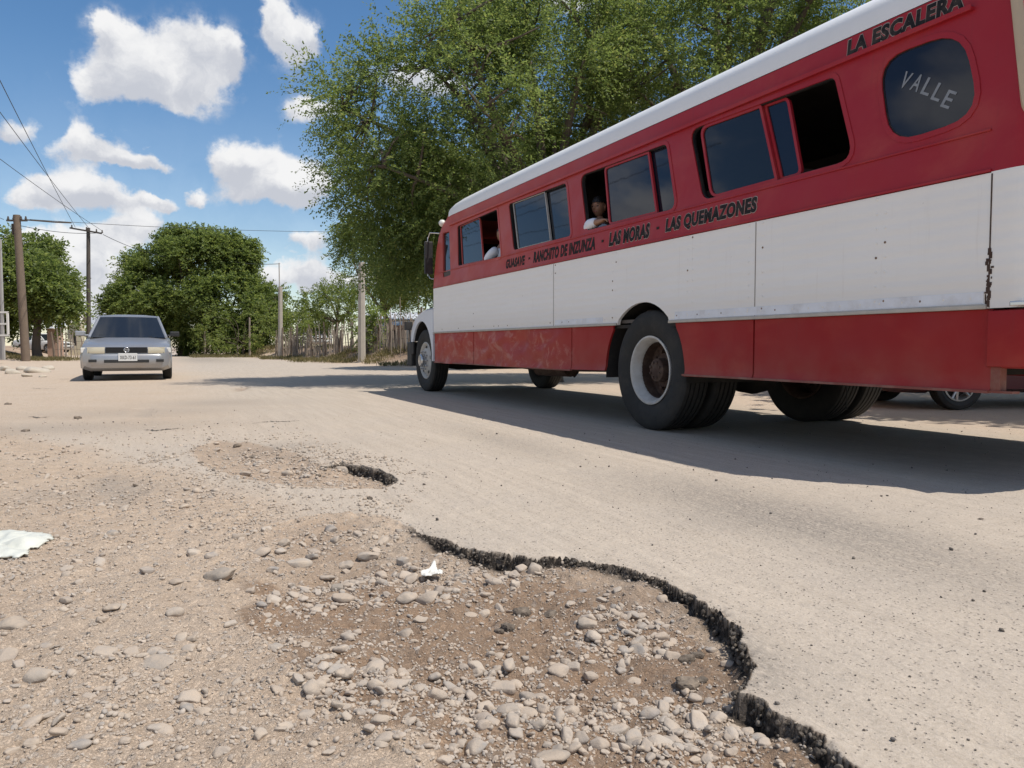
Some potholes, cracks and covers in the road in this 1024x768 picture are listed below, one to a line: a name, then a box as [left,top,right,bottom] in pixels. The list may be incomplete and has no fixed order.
pothole [187,440,399,489]
pothole [212,511,860,768]
